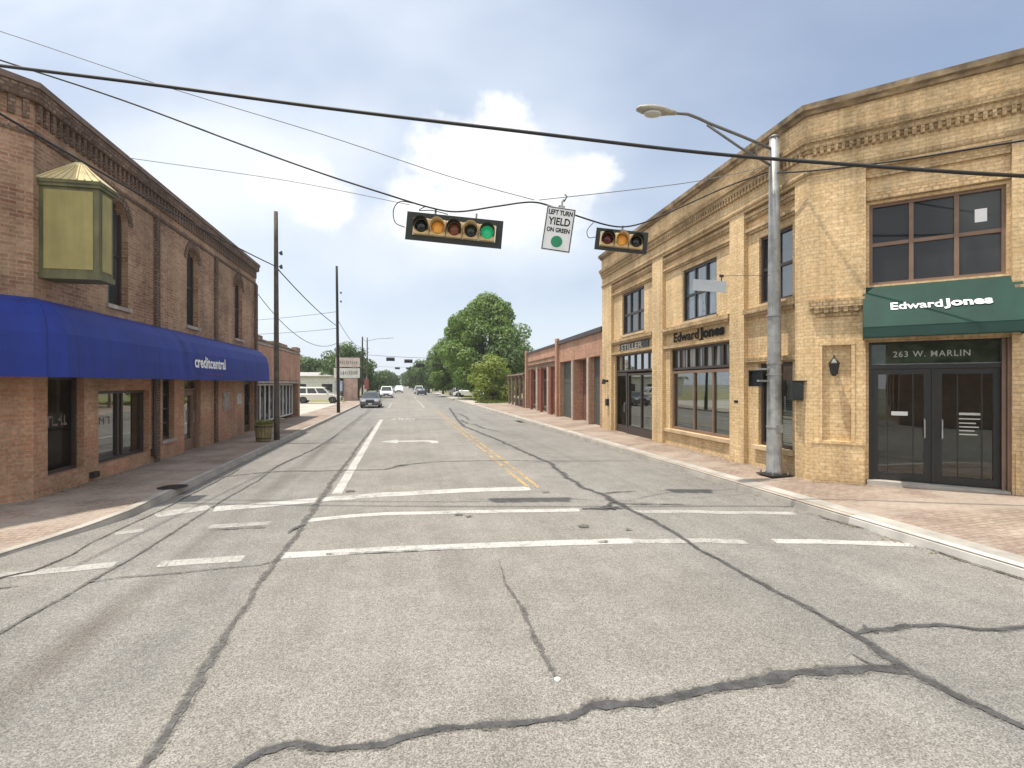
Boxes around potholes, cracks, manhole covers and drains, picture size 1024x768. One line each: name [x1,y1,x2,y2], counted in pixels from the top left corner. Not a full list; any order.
crack [0,433,633,633]
crack [499,561,555,676]
crack [606,490,678,506]
